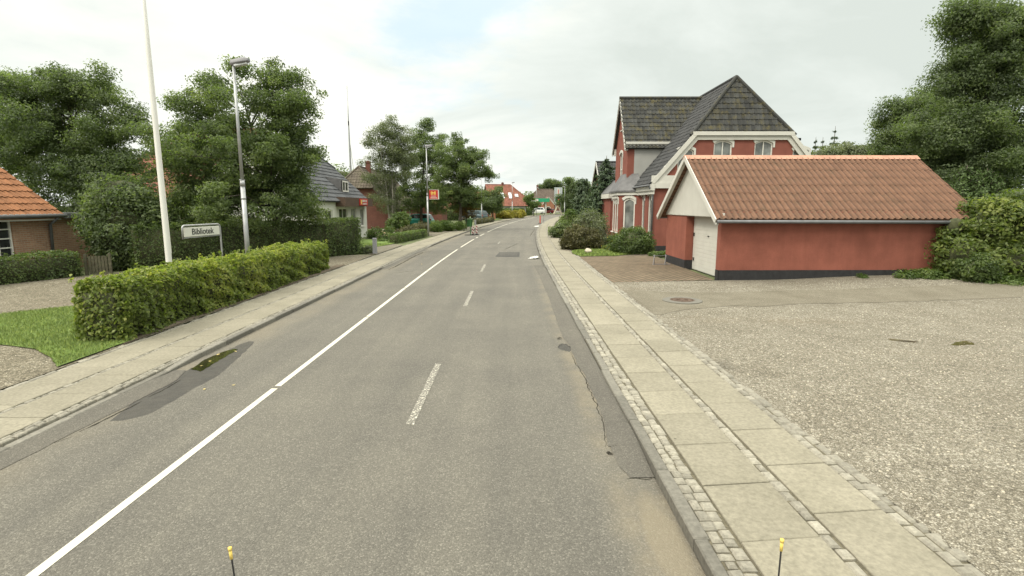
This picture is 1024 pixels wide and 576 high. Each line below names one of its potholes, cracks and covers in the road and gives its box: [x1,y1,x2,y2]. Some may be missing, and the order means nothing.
crack [572,356,606,447]
